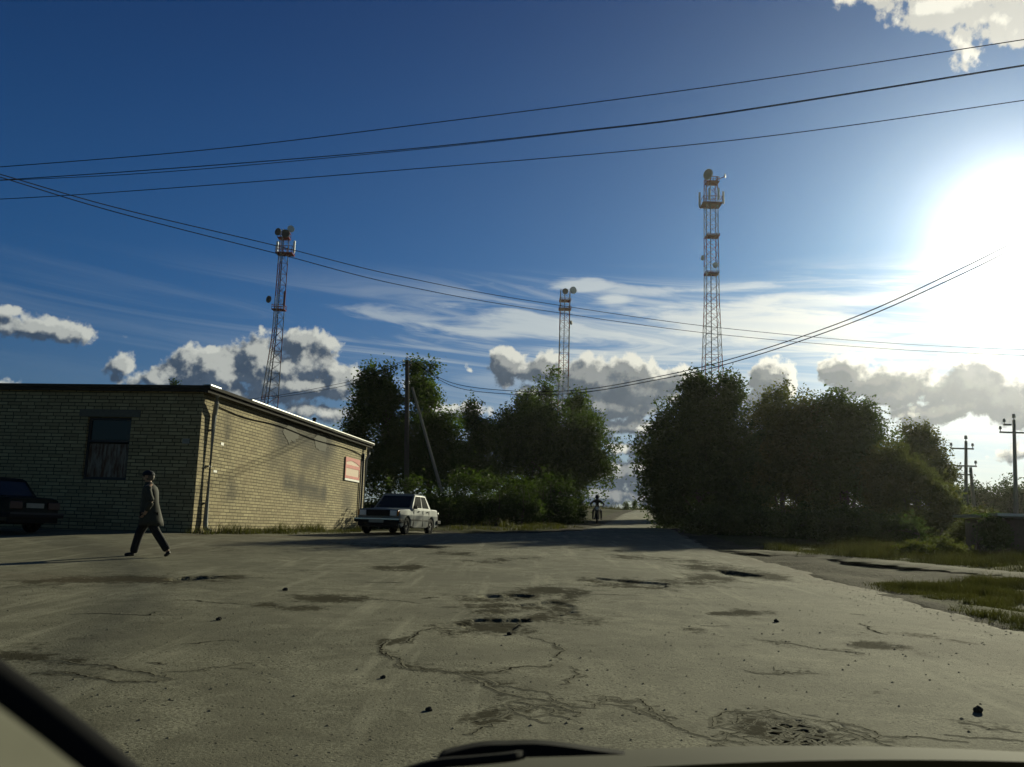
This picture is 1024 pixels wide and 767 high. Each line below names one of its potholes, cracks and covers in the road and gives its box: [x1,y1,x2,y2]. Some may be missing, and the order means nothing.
pothole [147,575,244,583]
pothole [460,593,555,603]
pothole [577,575,685,592]
pothole [439,615,547,635]
pothole [704,569,776,578]
crack [376,628,1023,747]
pothole [467,599,596,620]
